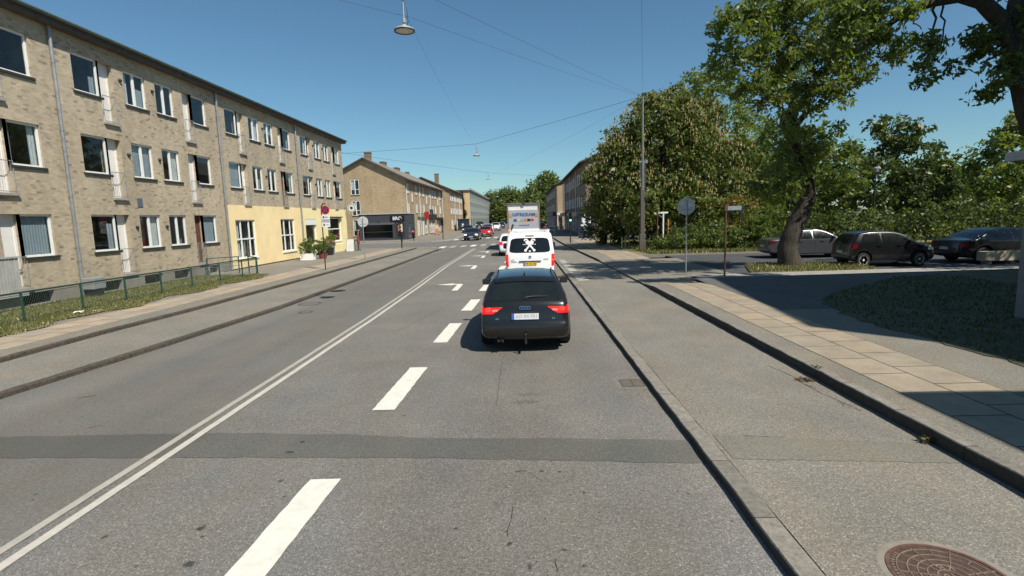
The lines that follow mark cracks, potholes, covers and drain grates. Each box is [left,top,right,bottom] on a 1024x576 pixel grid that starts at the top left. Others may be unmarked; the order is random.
drain grate [618,379,647,387]
manhole cover [876,540,1014,576]
